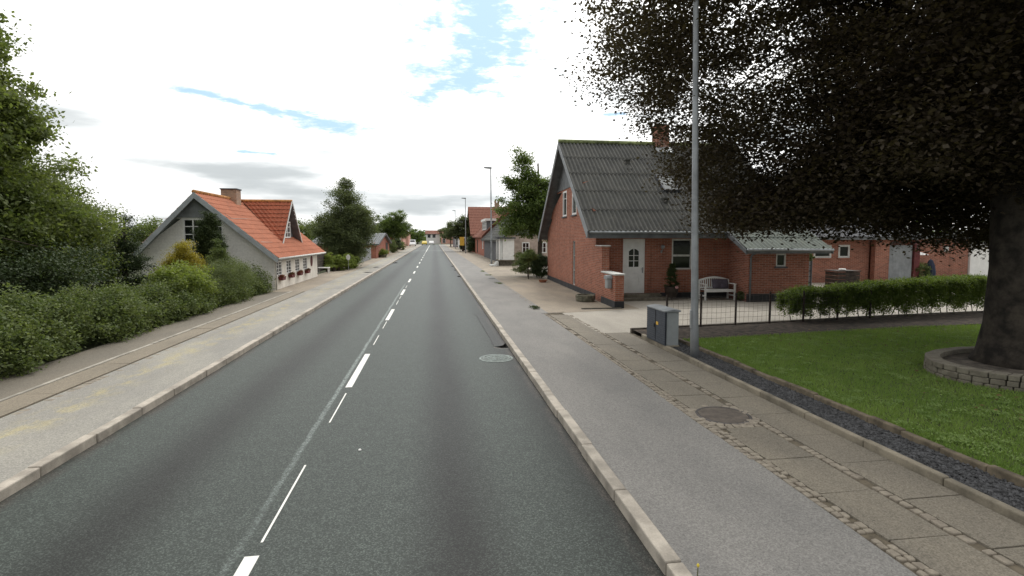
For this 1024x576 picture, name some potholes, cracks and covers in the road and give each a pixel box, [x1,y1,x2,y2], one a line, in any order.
manhole cover [695,406,753,425]
manhole cover [479,354,513,362]
